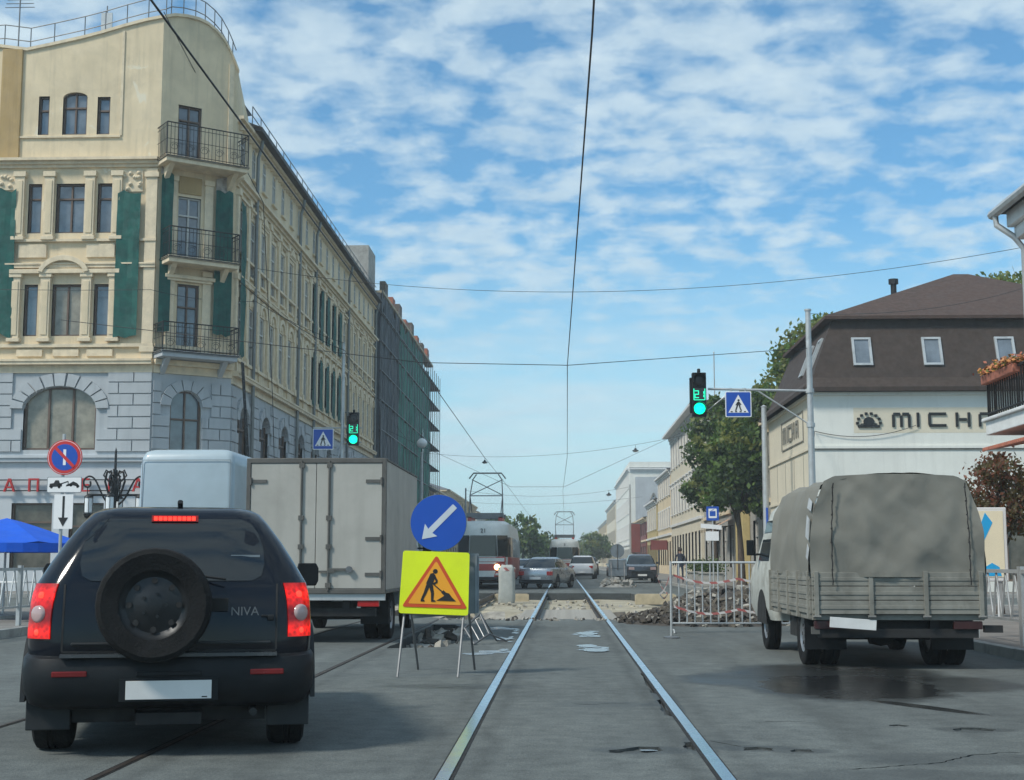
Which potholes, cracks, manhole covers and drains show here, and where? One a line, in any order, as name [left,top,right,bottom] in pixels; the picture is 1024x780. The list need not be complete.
crack [858,752,1017,769]
pothole [388,625,459,648]
